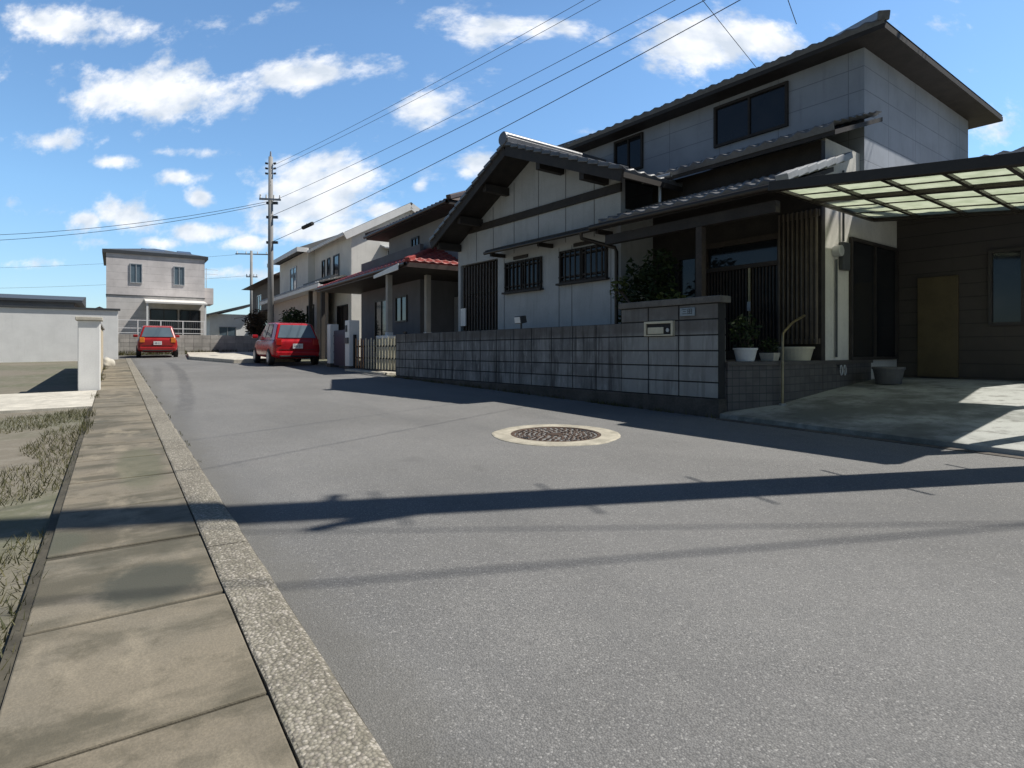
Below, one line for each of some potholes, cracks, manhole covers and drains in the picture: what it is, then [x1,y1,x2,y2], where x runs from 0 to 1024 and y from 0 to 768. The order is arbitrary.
manhole cover [491,424,621,447]
